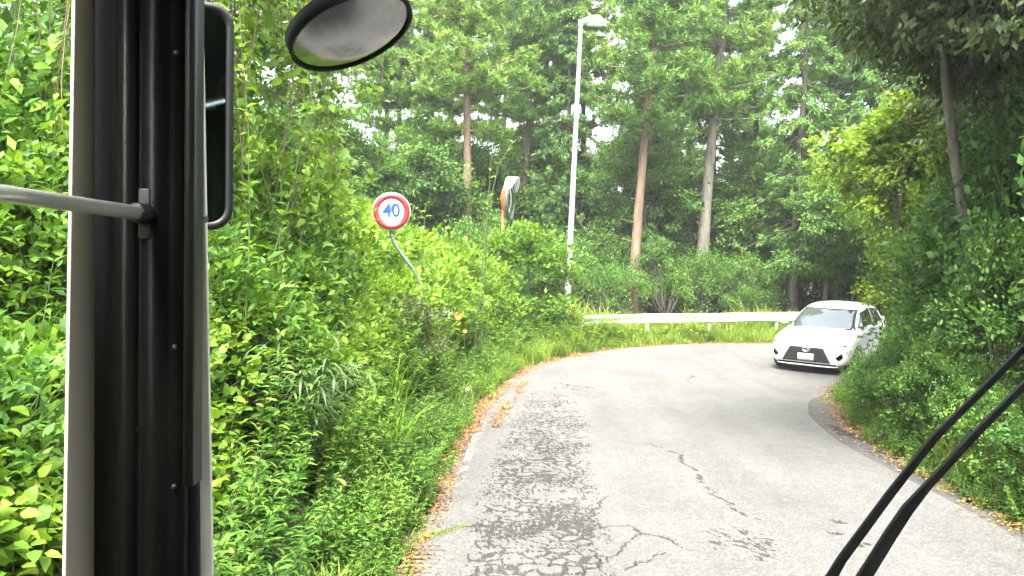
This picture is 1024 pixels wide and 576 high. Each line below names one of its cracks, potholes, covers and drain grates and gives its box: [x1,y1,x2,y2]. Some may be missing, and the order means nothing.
crack [431,382,795,576]
